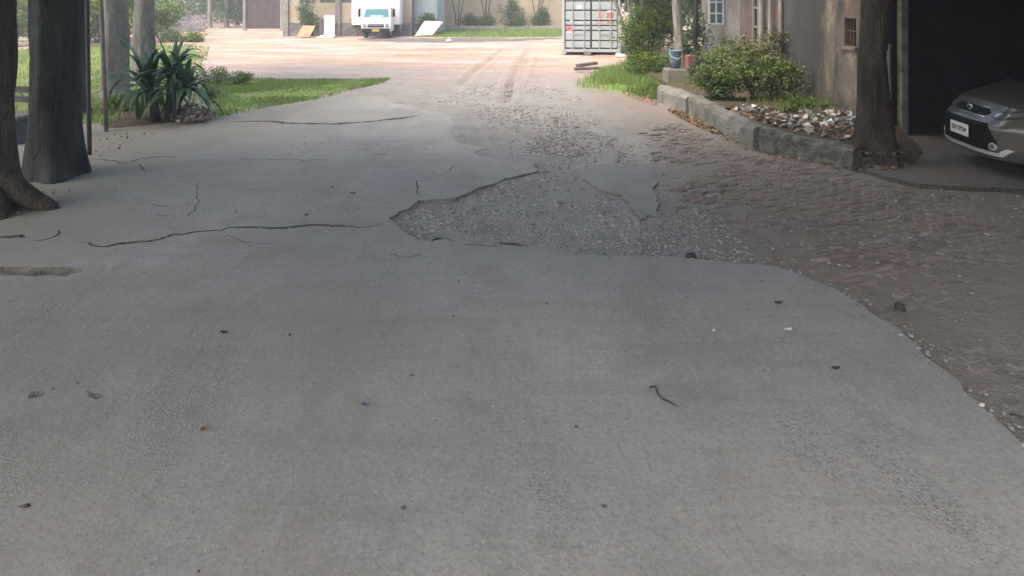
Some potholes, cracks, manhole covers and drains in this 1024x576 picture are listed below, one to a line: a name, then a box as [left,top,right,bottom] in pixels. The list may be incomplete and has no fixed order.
crack [0,229,61,241]
crack [82,184,379,247]
pothole [394,171,664,256]
crack [237,114,420,125]
crack [96,156,173,172]
